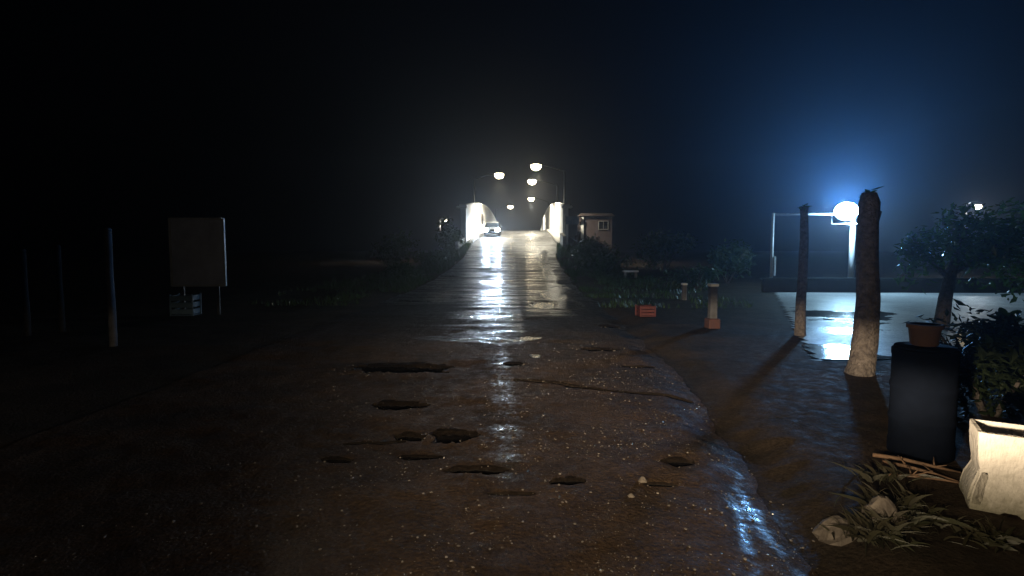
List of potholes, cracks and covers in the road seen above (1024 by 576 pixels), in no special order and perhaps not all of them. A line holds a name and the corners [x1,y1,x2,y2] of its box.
pothole [393,431,428,441]
pothole [351,361,455,373]
pothole [371,400,431,411]
pothole [549,476,586,485]
pothole [443,465,509,475]
pothole [429,427,481,444]
crack [513,378,694,404]
pothole [660,456,695,467]
